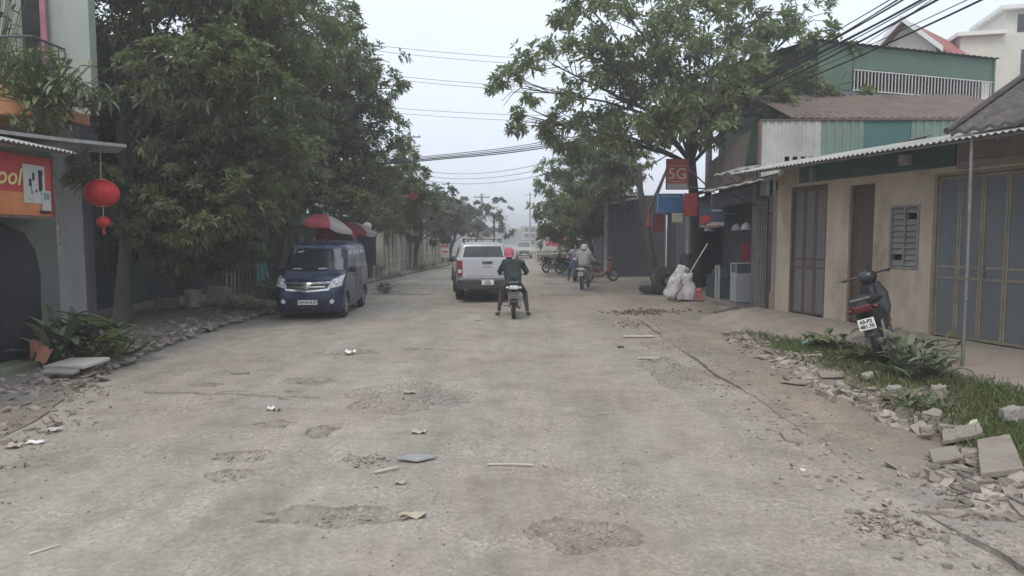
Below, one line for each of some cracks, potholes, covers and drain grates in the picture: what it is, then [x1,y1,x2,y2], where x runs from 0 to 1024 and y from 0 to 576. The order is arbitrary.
pothole [636,355,712,389]
pothole [522,516,646,556]
pothole [204,469,263,482]
pothole [281,377,338,385]
pothole [255,504,412,529]
pothole [305,425,342,439]
pothole [344,382,481,415]
pothole [211,450,272,463]
